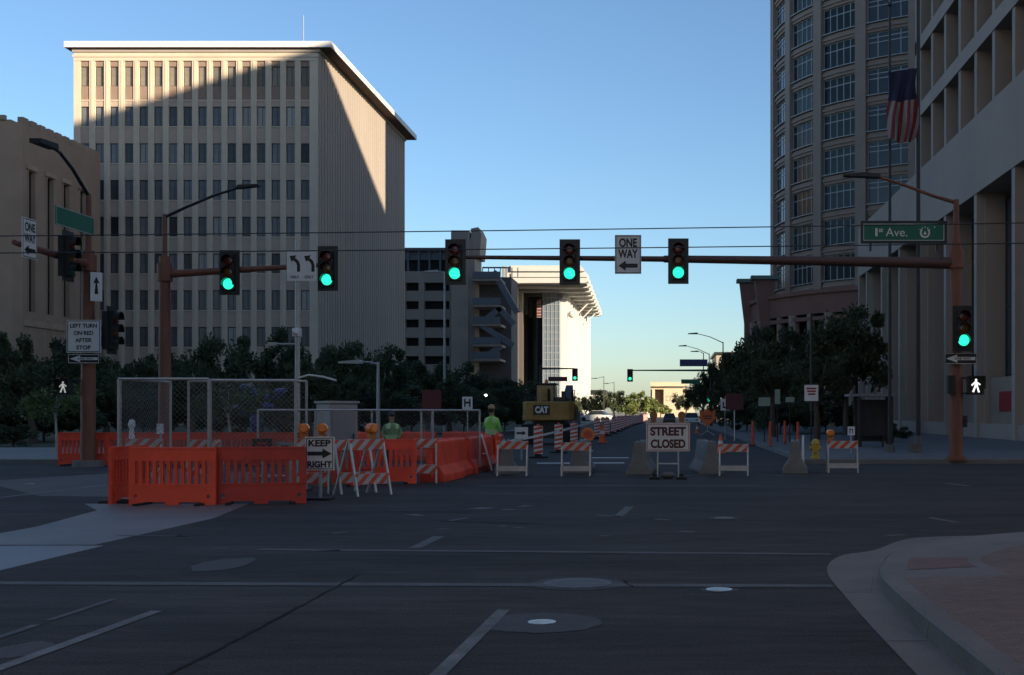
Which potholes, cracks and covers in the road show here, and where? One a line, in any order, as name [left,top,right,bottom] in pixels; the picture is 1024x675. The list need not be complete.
manhole cover [531,577,623,590]
manhole cover [484,612,603,633]
